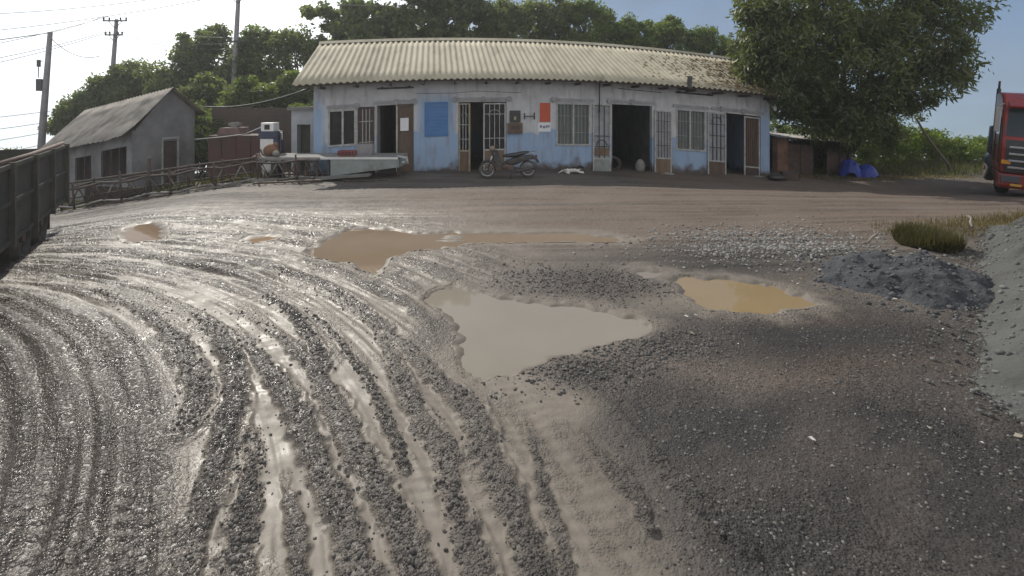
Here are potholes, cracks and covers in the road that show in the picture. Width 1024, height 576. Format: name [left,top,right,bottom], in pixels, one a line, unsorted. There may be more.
pothole [238,234,283,244]
pothole [302,226,670,280]
pothole [657,274,824,315]
pothole [115,221,172,244]
pothole [424,284,655,383]
